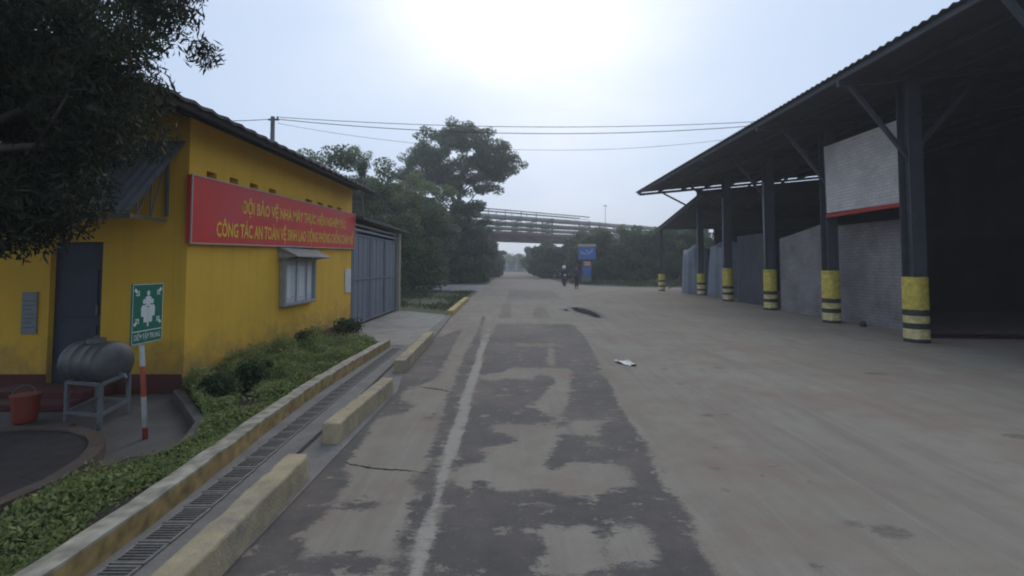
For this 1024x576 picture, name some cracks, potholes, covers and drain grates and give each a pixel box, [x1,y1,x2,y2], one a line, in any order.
drain grate [183,492,229,507]
drain grate [257,440,289,448]
drain grate [232,458,268,468]
pothole [567,307,607,318]
drain grate [268,432,298,440]
drain grate [163,507,212,524]
drain grate [108,543,169,566]
drain grate [138,524,193,544]
drain grate [92,565,142,576]
drain grate [218,468,257,480]
drain grate [202,479,244,492]
drain grate [245,448,279,458]
